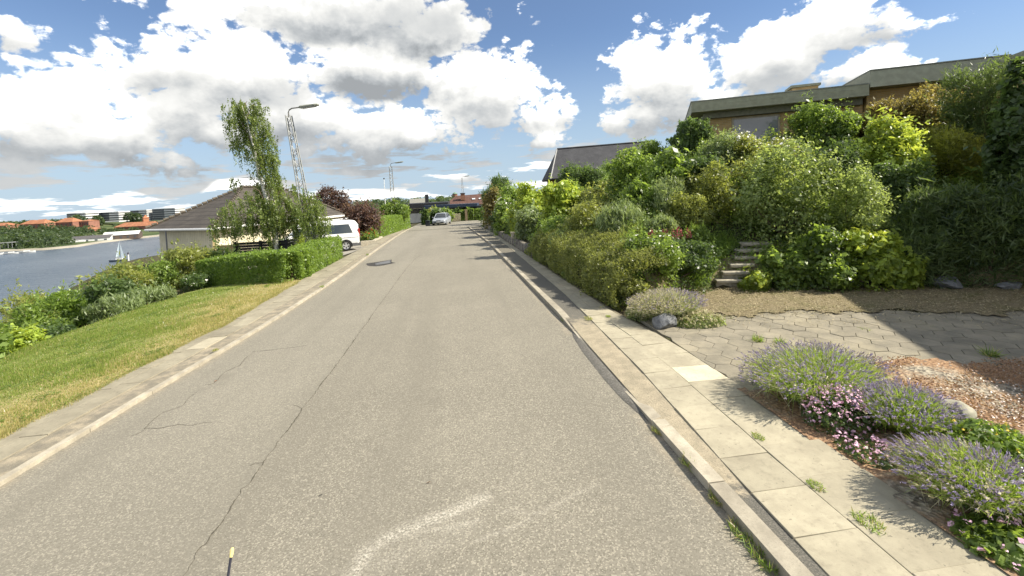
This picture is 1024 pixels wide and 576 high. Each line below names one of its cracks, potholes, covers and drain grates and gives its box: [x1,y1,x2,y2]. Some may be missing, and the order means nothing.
crack [183,272,404,576]
crack [132,346,299,436]
